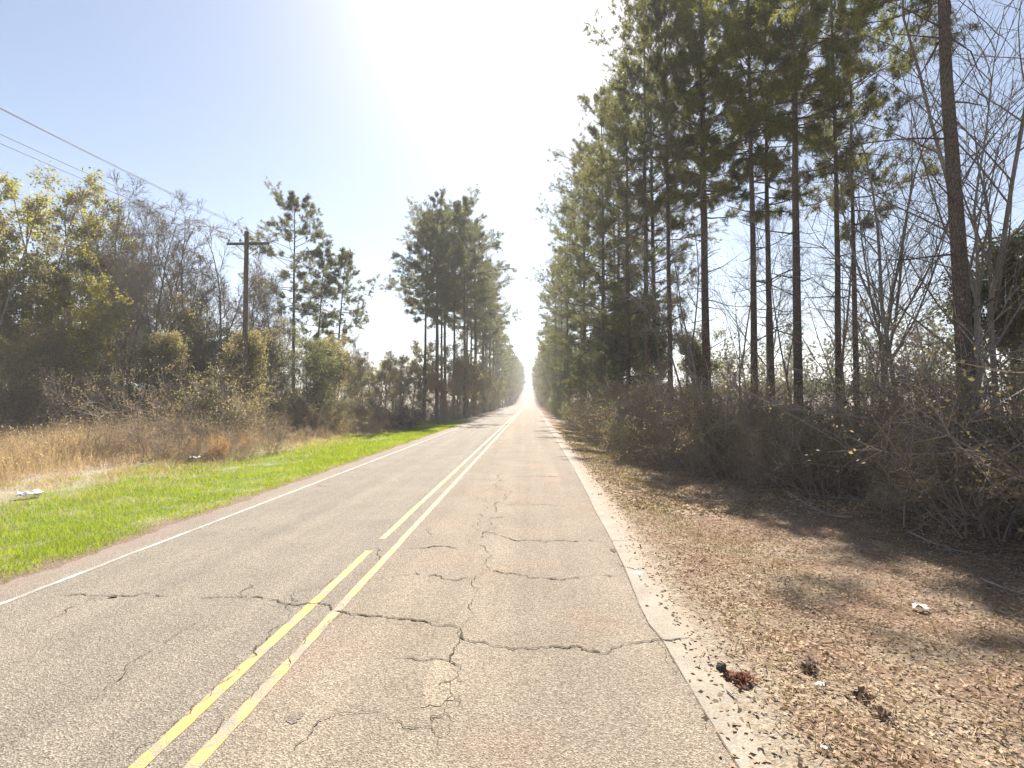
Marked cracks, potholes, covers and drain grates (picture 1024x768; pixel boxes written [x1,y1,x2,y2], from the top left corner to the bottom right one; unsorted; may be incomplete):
crack [29,580,688,758]
crack [377,438,634,623]
